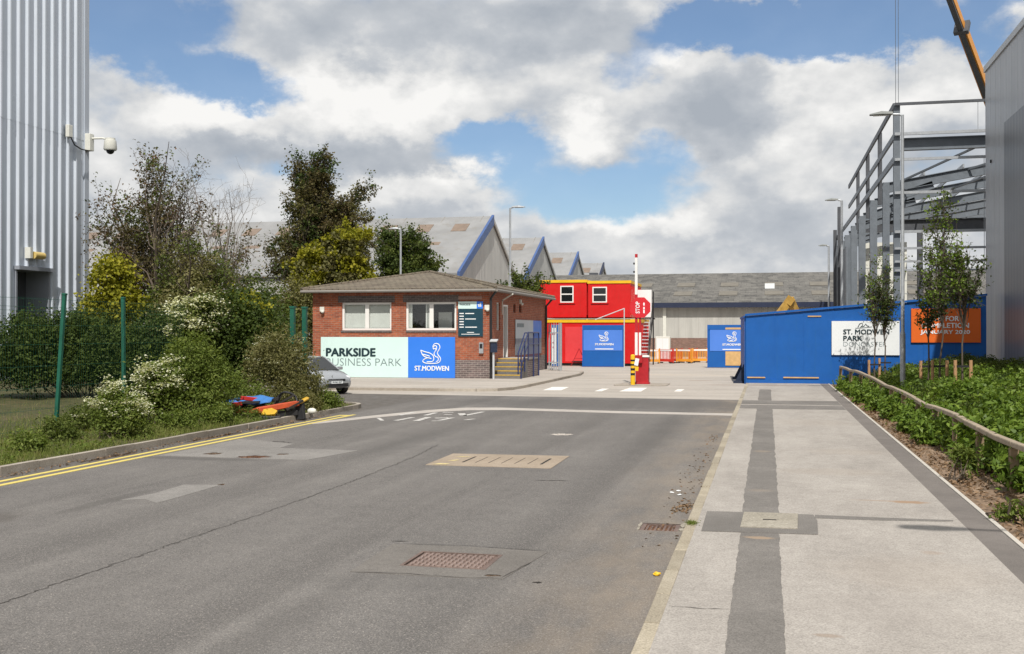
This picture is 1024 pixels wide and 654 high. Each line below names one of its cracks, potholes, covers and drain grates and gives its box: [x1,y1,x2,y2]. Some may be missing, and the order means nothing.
utility cover [740,512,798,529]
drain grate [637,522,686,532]
